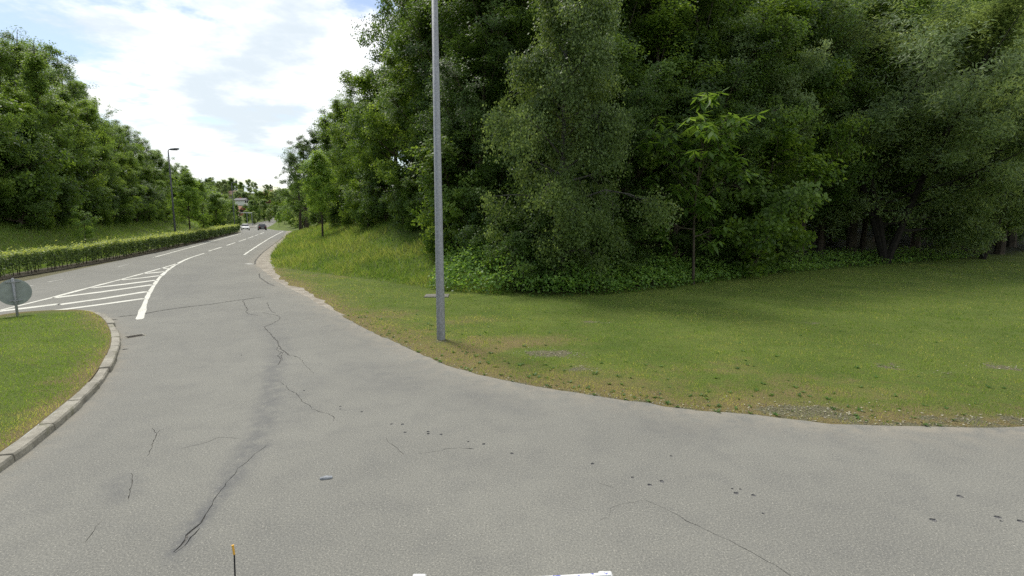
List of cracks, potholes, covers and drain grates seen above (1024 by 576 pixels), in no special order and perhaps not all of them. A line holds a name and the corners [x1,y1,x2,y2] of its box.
crack [242,237,314,374]
crack [597,482,791,576]
crack [173,446,266,553]
